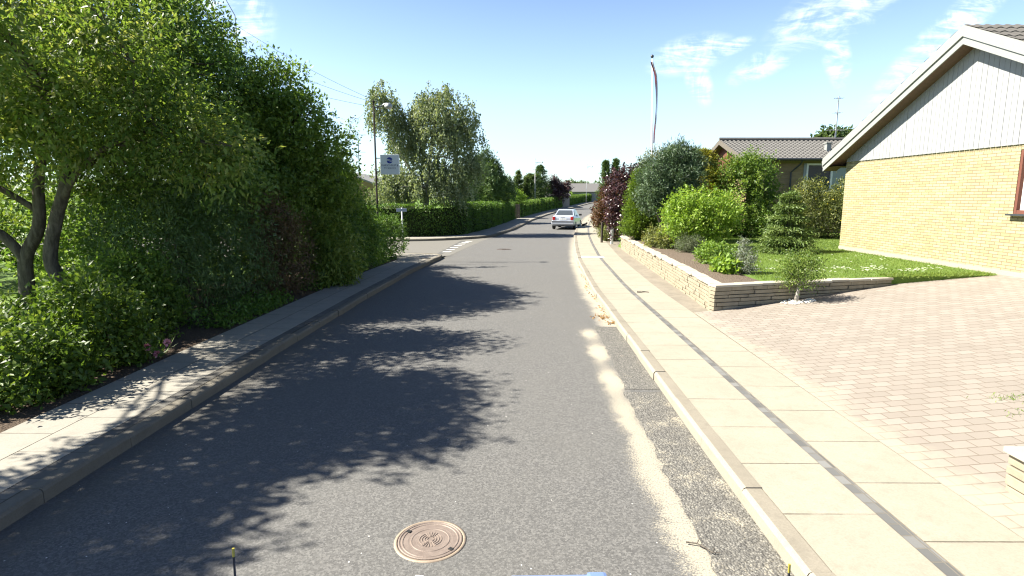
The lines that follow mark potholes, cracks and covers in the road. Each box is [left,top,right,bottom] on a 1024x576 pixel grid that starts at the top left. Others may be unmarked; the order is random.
manhole cover [394,520,466,563]
